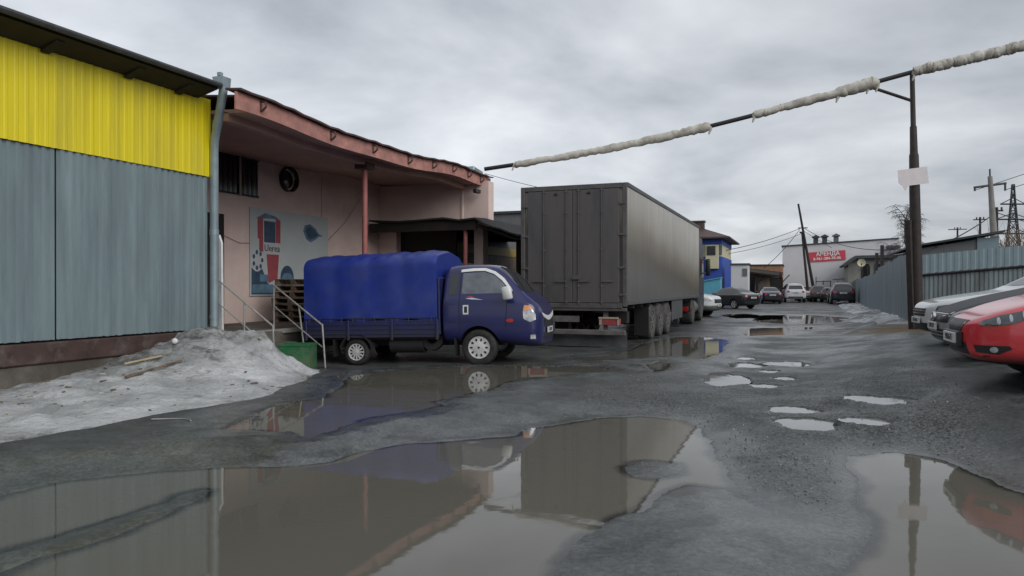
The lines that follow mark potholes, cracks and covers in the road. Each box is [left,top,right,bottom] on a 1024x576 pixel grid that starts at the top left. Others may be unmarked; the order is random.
pothole [771,416,841,431]
pothole [840,394,924,405]
pothole [838,416,894,426]
pothole [699,372,755,386]
pothole [767,405,825,413]
